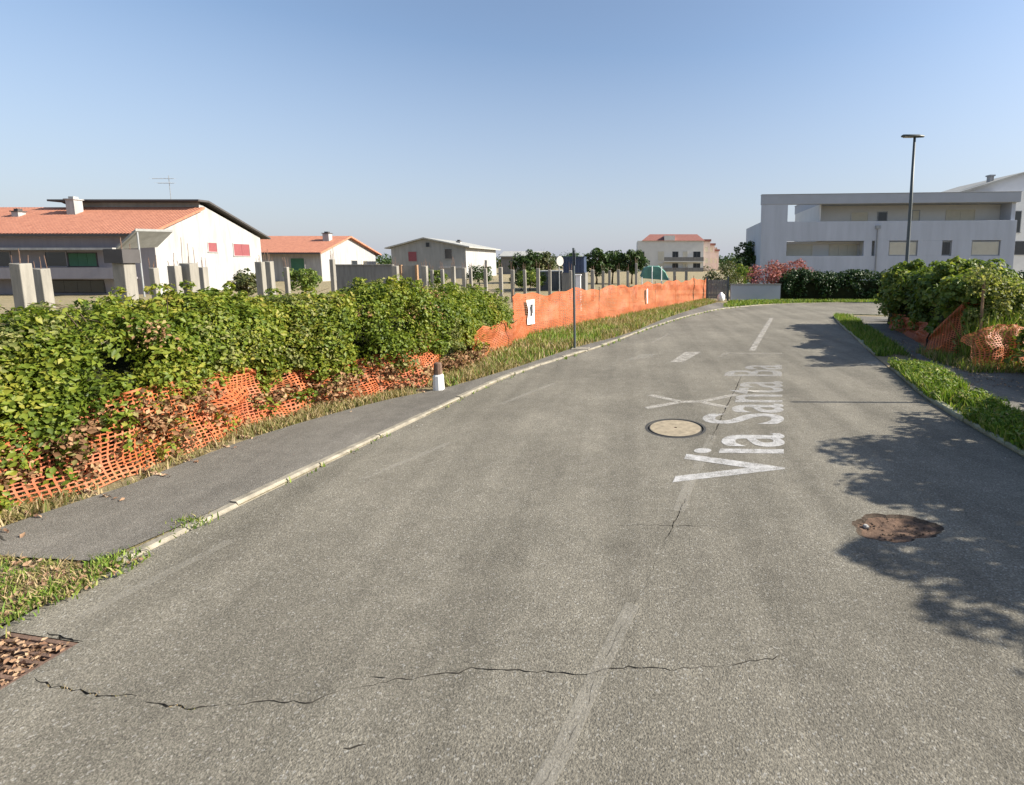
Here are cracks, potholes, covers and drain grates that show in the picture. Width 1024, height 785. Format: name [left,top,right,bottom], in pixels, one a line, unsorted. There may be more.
drain grate [0,633,78,690]
manhole cover [645,418,706,438]
pothole [852,513,944,543]
crack [28,500,777,785]
